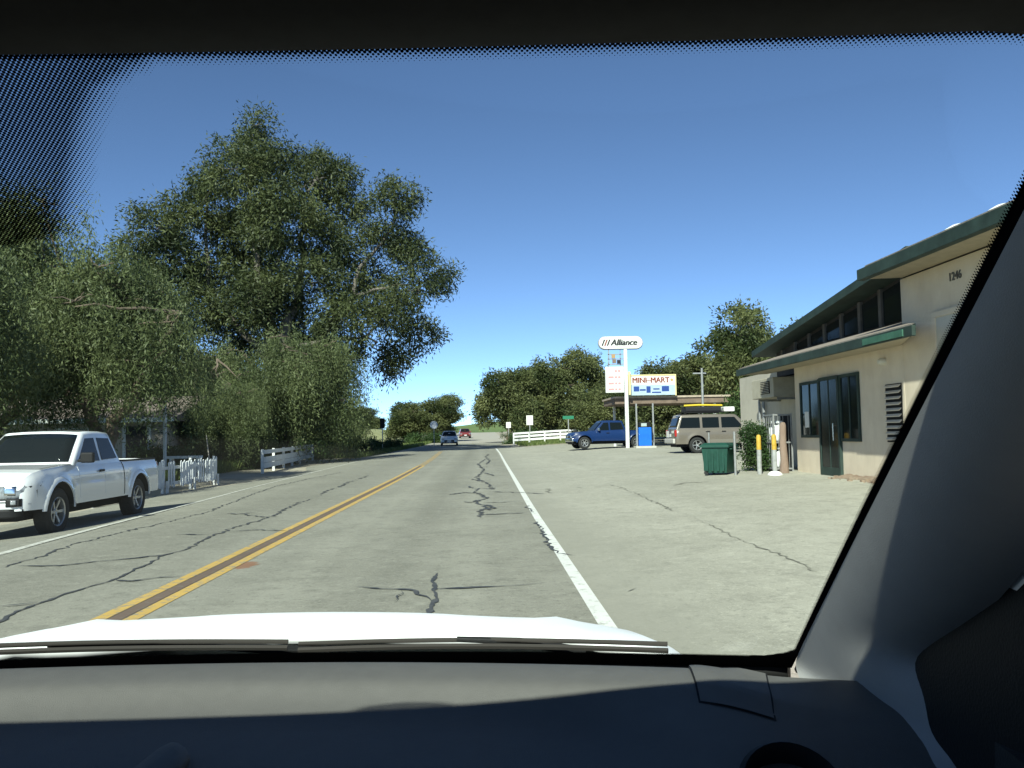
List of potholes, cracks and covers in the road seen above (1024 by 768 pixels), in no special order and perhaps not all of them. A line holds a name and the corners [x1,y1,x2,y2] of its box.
crack [358,573,534,613]
crack [449,454,571,555]
crack [0,472,367,622]
